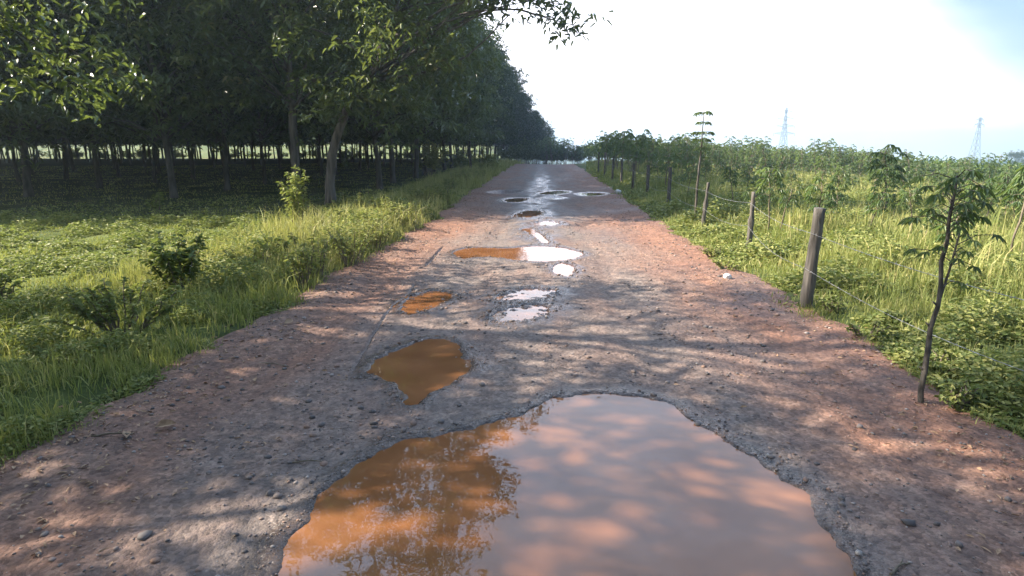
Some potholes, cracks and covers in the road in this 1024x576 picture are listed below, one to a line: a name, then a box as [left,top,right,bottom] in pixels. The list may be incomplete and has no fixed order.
pothole [475,301,567,327]
pothole [345,334,495,415]
pothole [444,243,593,263]
pothole [233,384,907,576]
pothole [514,225,559,244]
pothole [507,208,553,219]
pothole [483,285,571,305]
pothole [542,261,587,279]
pothole [386,287,467,319]
crack [349,246,447,365]
